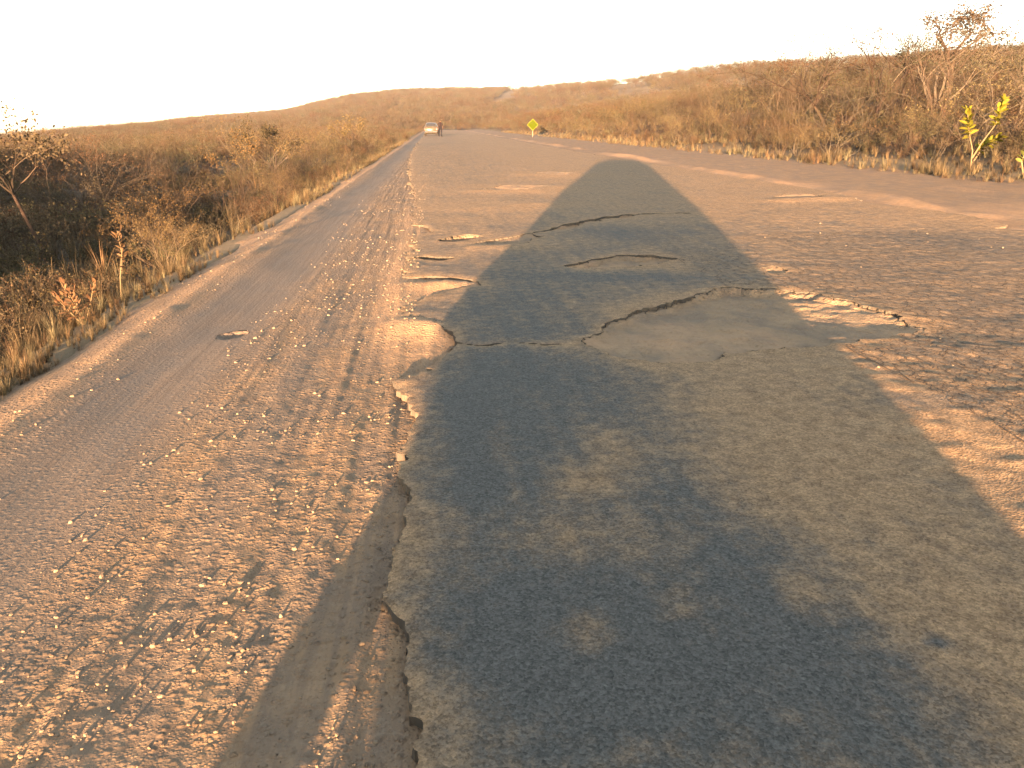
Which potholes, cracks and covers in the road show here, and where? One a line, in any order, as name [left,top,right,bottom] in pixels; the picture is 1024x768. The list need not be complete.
crack [533,212,689,233]
crack [637,230,1024,442]
